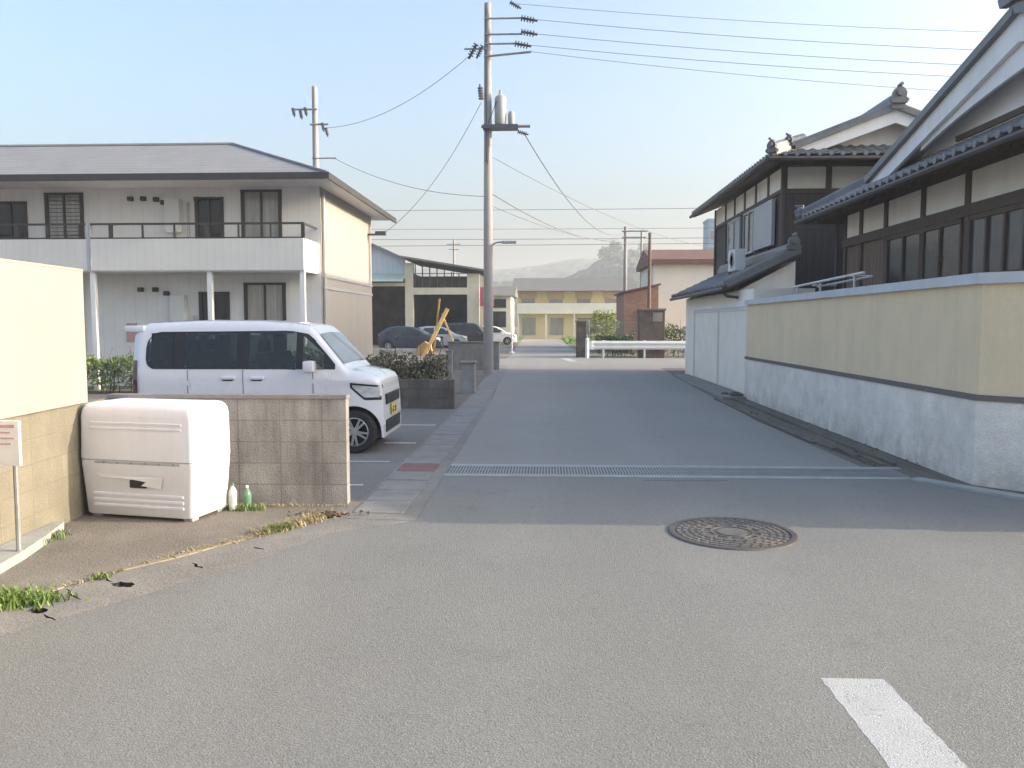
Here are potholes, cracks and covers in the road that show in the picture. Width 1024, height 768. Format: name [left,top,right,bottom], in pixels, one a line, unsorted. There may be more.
manhole cover [667,517,800,551]
